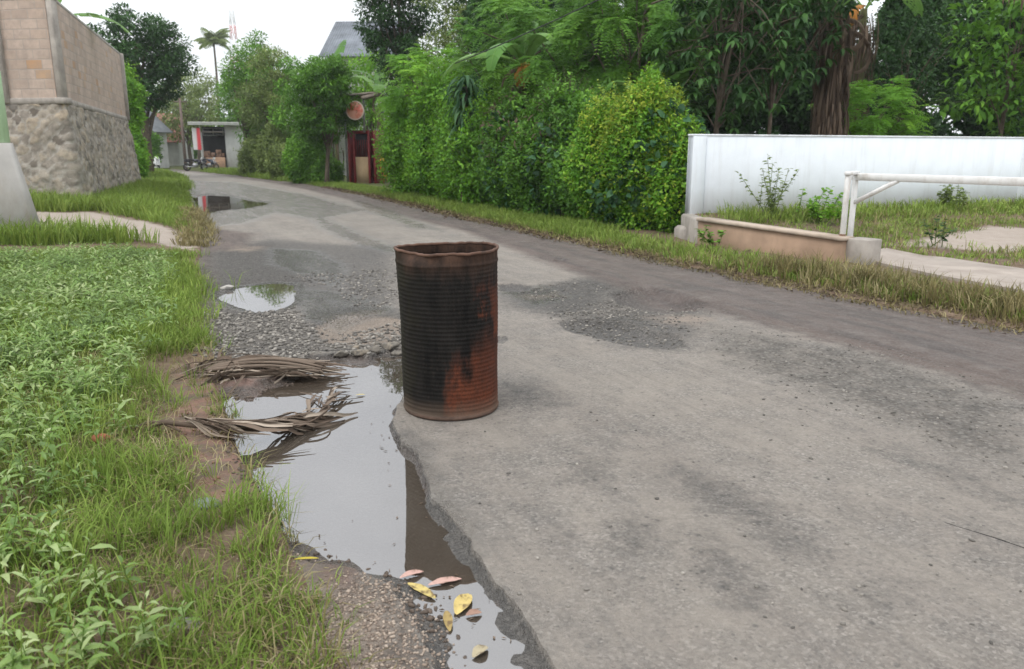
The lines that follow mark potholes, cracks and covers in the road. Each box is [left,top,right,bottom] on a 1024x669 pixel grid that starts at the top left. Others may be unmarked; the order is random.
pothole [191,193,274,214]
crack [945,522,1024,548]
pothole [207,278,306,317]
pothole [215,347,556,669]
